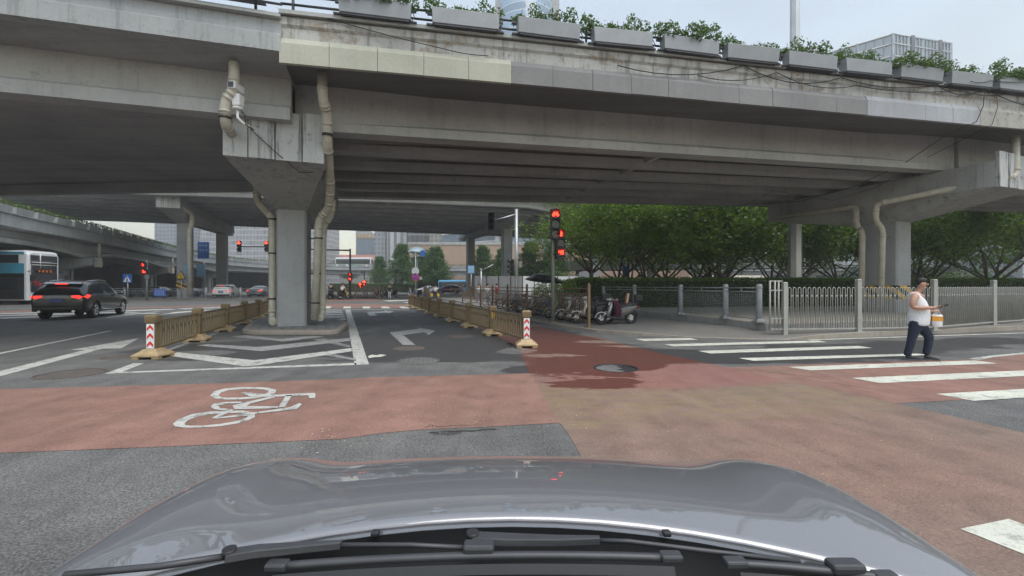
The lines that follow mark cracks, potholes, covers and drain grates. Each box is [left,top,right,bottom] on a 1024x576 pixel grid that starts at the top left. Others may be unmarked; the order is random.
manhole cover [397,357,440,365]
manhole cover [593,364,639,373]
manhole cover [30,368,109,380]
